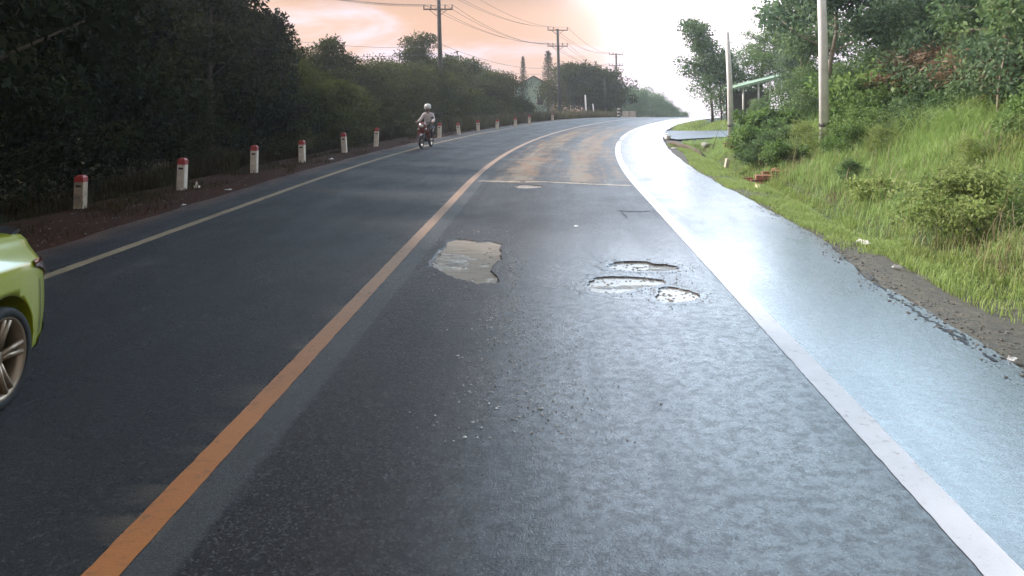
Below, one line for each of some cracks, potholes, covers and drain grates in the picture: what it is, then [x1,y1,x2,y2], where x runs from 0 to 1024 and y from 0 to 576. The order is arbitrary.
pothole [597,259,690,273]
pothole [414,234,510,293]
pothole [648,283,707,305]
pothole [574,273,678,296]
